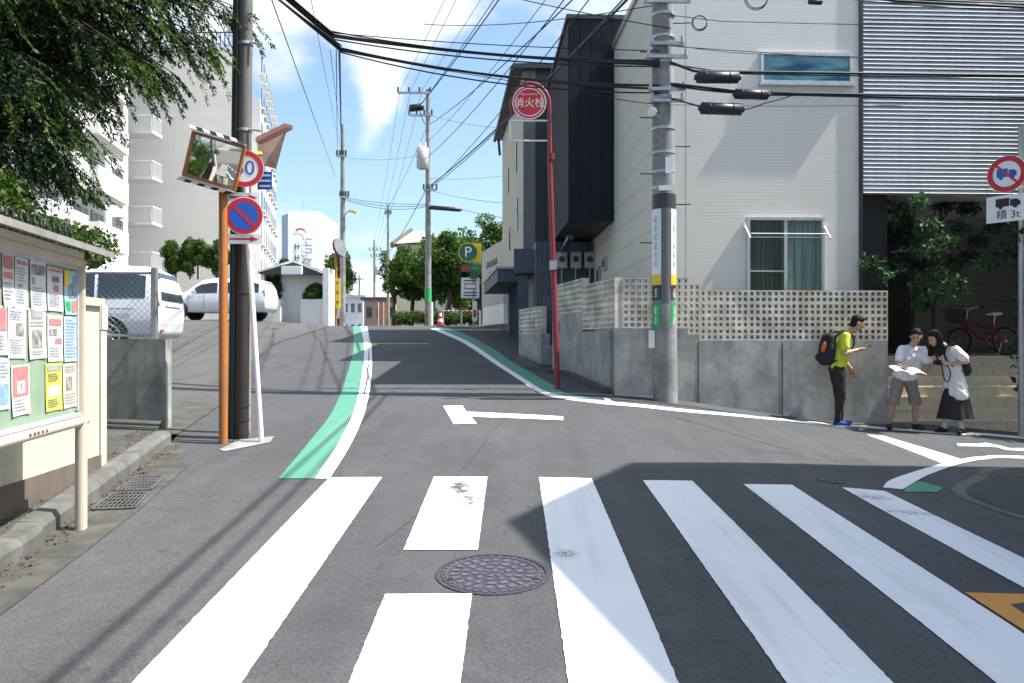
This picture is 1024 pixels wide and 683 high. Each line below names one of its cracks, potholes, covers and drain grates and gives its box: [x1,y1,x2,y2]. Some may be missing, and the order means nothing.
drain grate [114,474,166,491]
drain grate [89,491,150,511]
crack [375,413,511,547]
manhole cover [435,554,550,596]
